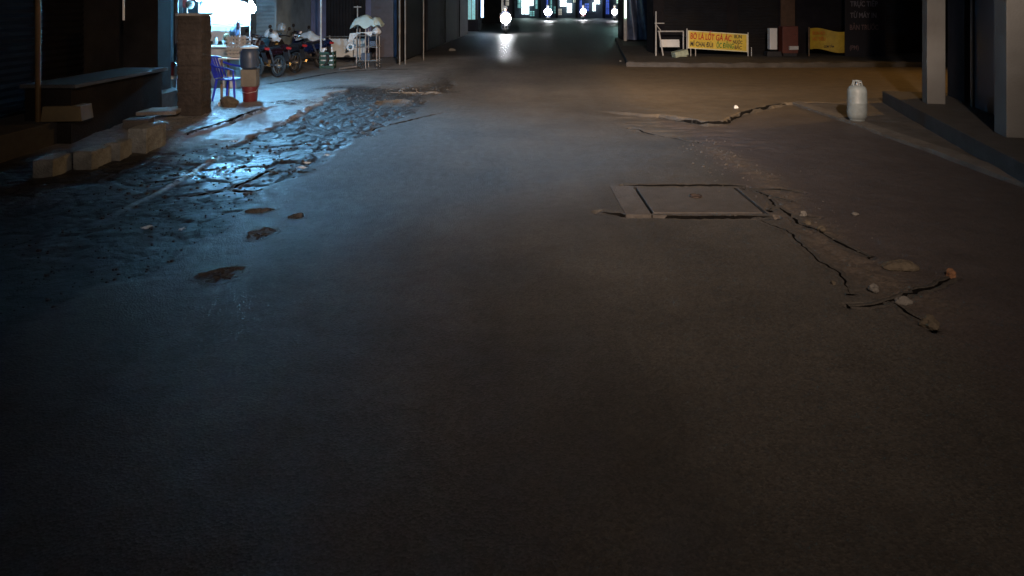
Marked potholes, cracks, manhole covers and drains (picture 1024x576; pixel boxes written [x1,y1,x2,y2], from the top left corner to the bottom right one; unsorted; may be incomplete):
pothole [242,226,281,242]
pothole [371,99,413,107]
pothole [240,207,279,215]
pothole [188,265,251,286]
manhole cover [610,186,771,218]
pothole [283,212,308,221]
crack [597,183,960,333]
crack [629,103,788,143]
